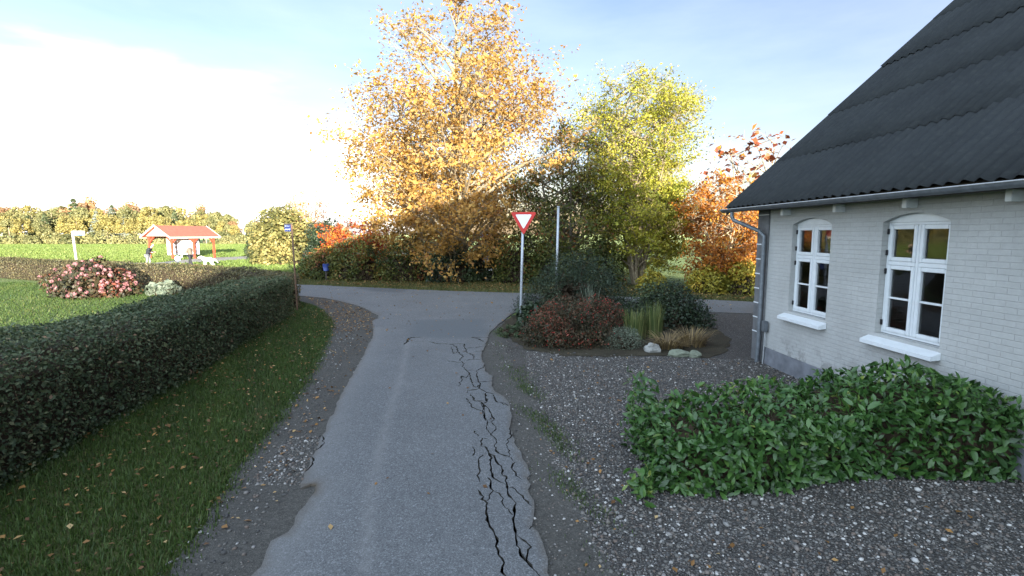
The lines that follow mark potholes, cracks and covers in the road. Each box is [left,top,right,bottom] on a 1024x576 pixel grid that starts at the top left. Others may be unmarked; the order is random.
crack [432,342,540,576]
